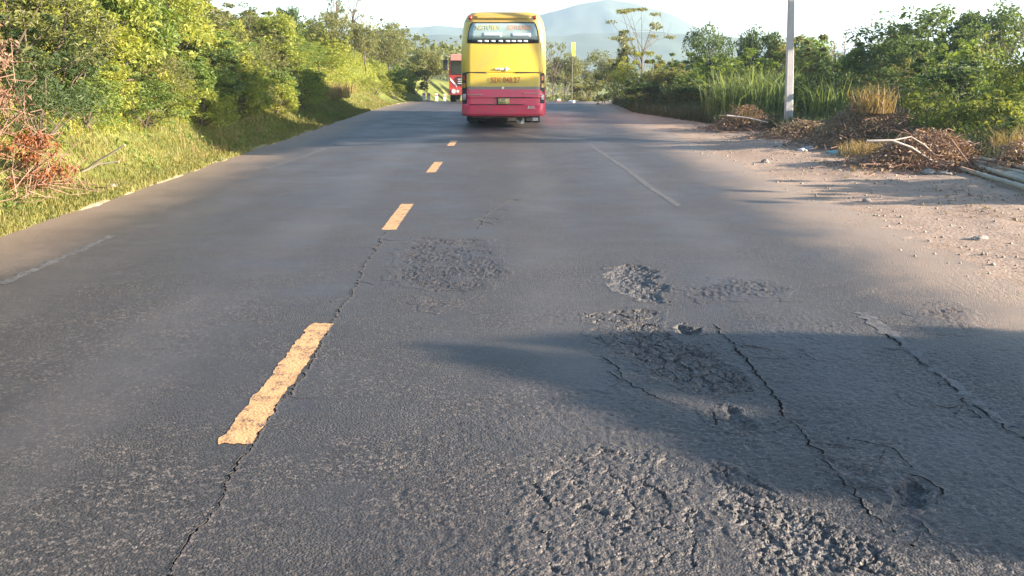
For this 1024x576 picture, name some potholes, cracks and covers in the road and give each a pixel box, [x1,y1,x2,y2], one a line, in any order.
pothole [728,476,786,509]
pothole [884,476,943,514]
pothole [667,322,709,337]
pothole [598,263,674,306]
pothole [692,403,774,436]
crack [493,275,1024,576]
